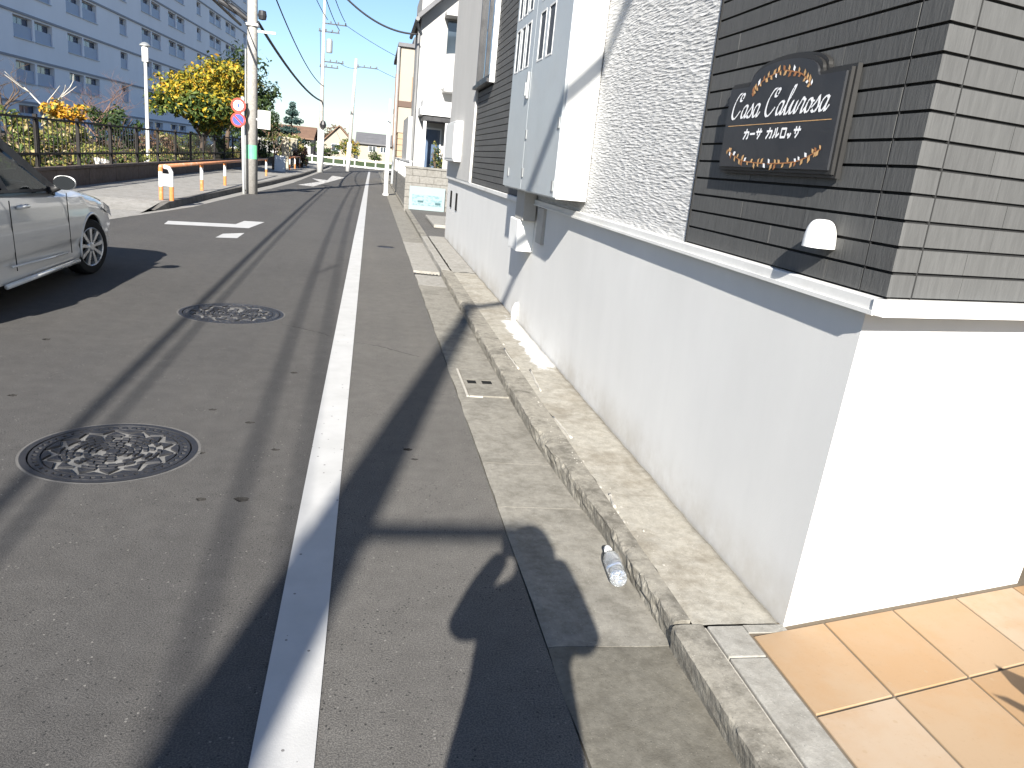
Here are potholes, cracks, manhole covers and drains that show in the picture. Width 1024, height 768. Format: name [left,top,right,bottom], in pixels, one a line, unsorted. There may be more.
manhole cover [177,303,285,324]
manhole cover [15,423,201,484]
